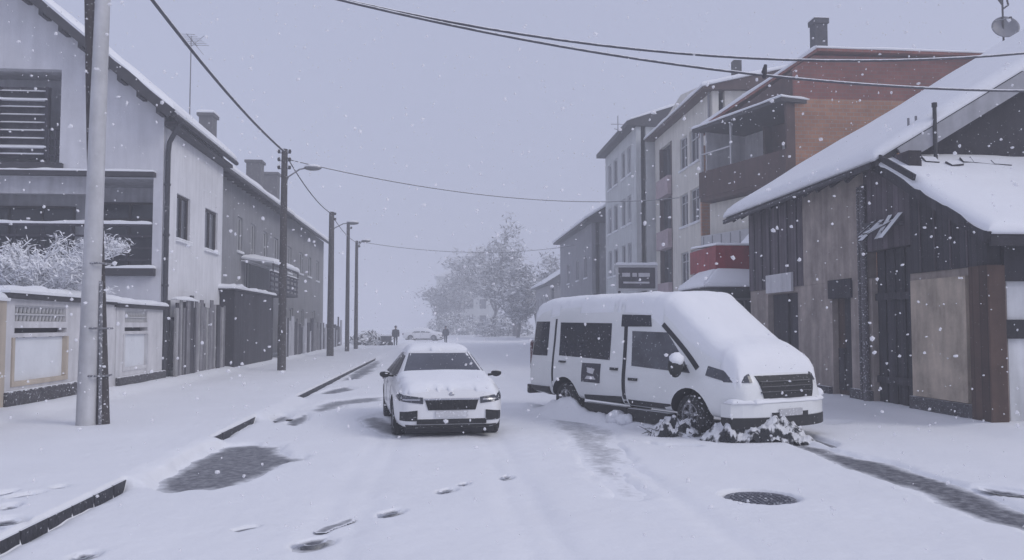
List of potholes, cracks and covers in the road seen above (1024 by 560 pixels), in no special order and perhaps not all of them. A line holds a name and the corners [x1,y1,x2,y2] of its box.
manhole cover [724,492,797,505]
